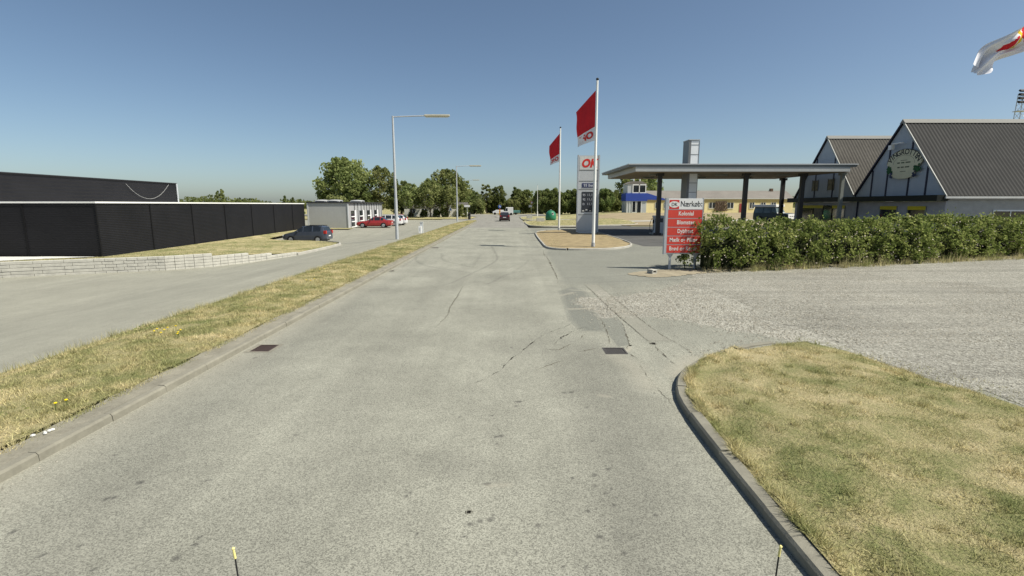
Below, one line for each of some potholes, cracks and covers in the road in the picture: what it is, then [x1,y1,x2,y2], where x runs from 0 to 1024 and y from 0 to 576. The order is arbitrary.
crack [478,323,663,395]
